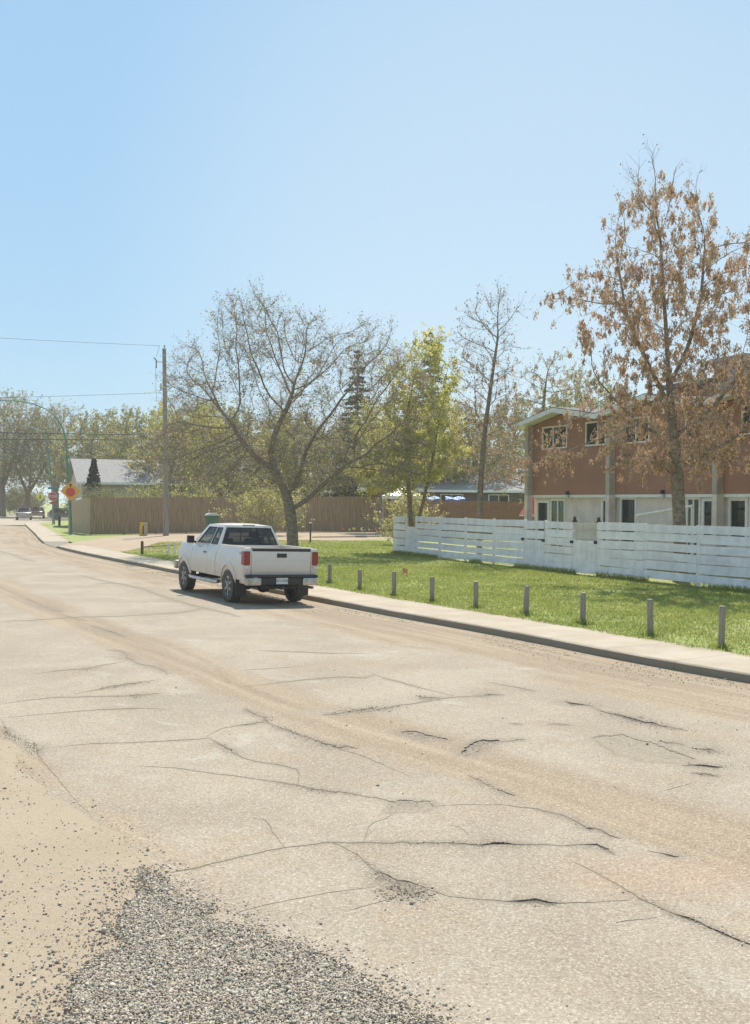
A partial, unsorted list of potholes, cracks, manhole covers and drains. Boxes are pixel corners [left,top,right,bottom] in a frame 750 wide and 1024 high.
crack [1,600,750,948]
pothole [461,739,499,756]
pothole [374,871,428,898]
pothole [593,734,694,764]
